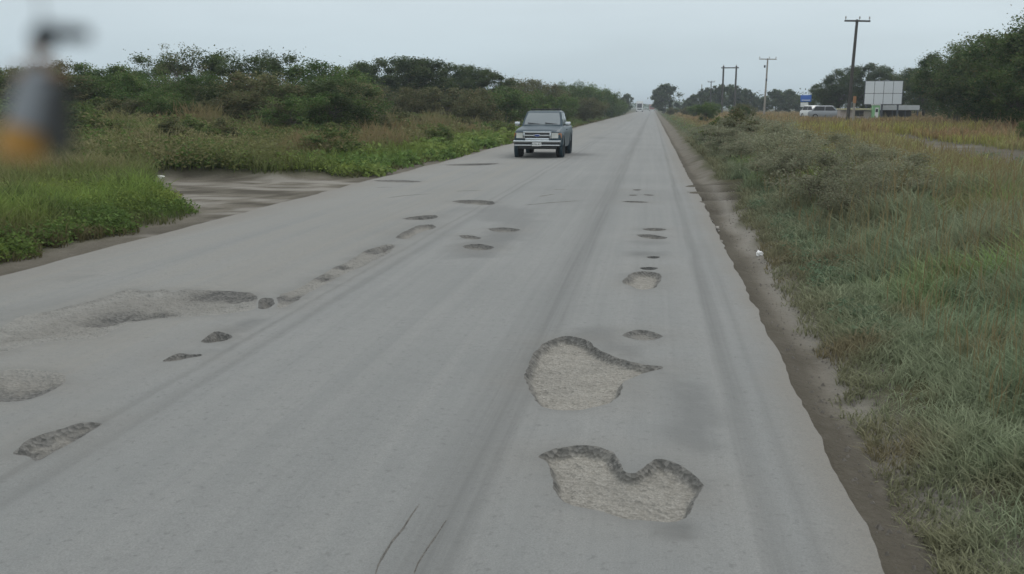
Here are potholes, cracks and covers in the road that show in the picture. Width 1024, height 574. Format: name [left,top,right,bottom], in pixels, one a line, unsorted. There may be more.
pothole [201,331,232,343]
pothole [396,224,436,239]
pothole [163,353,202,362]
pothole [524,336,663,410]
pothole [539,445,704,522]
pothole [623,330,663,340]
pothole [0,369,66,402]
pothole [622,271,662,290]
crack [375,505,448,574]
pothole [13,422,102,461]
